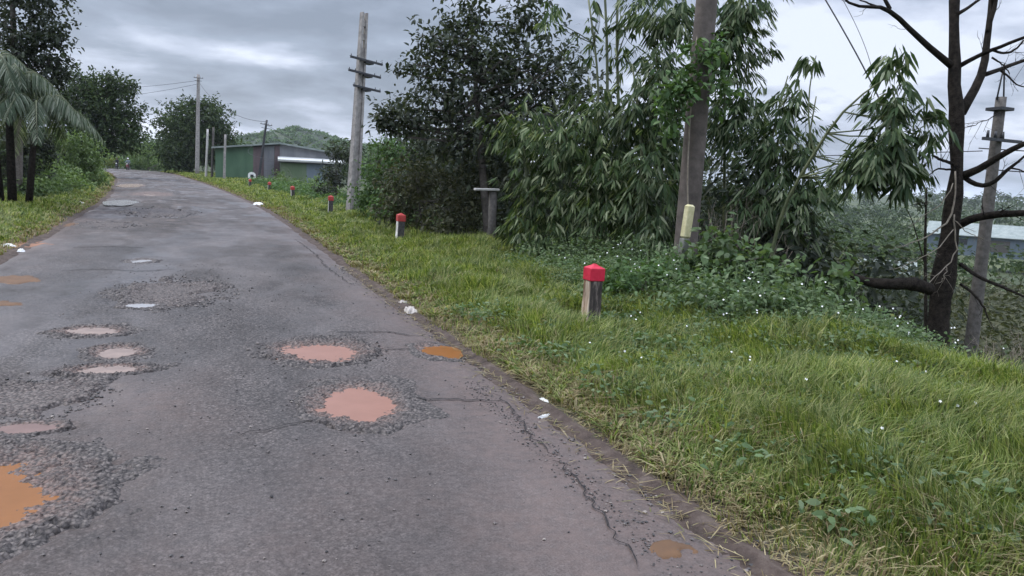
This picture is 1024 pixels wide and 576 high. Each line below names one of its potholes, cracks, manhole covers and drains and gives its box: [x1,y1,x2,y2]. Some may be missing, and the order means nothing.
pothole [0,431,167,562]
pothole [293,375,450,436]
pothole [0,418,77,438]
pothole [76,342,157,362]
crack [417,393,637,563]
pothole [99,198,143,208]
pothole [244,333,382,369]
pothole [36,322,151,339]
pothole [405,341,465,363]
pothole [44,361,183,379]
pothole [97,276,258,313]
